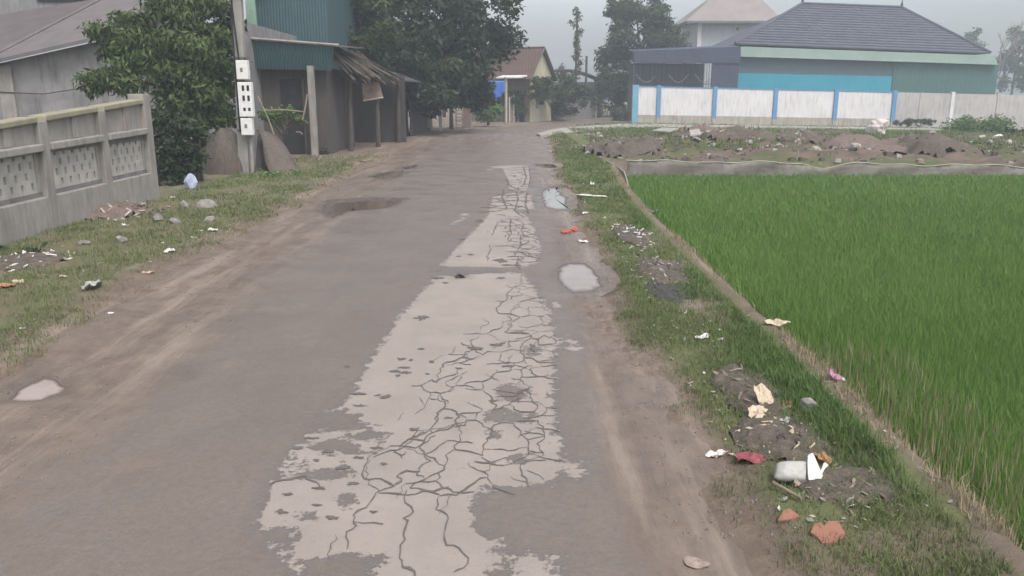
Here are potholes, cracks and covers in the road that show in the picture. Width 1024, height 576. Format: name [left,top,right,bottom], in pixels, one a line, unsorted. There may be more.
crack [457,166,541,269]
pothole [10,378,66,401]
pothole [557,263,603,293]
pothole [541,187,570,211]
pothole [321,198,403,217]
pothole [372,171,403,180]
